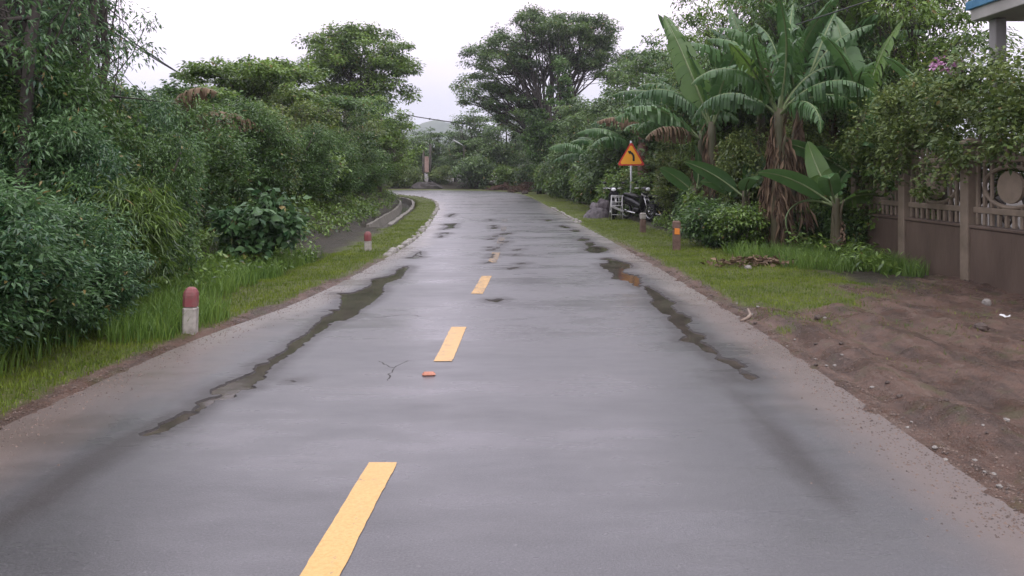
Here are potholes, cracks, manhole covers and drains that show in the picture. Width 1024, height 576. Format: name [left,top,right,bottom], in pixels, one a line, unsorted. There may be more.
pothole [138,266,410,436]
pothole [599,258,644,288]
